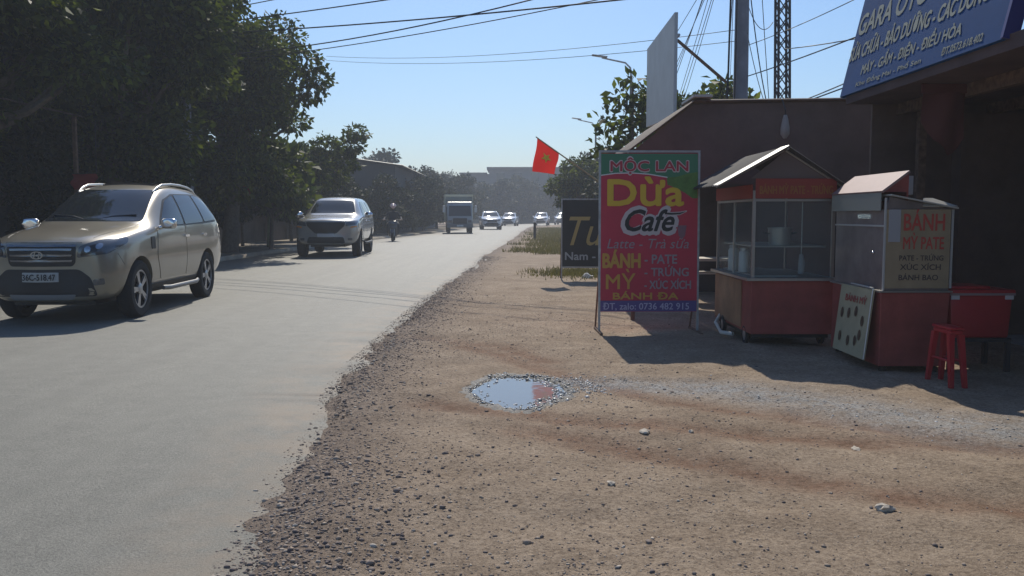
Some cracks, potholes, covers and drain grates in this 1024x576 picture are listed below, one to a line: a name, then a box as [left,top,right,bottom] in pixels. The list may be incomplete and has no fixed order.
pothole [458,373,579,414]
